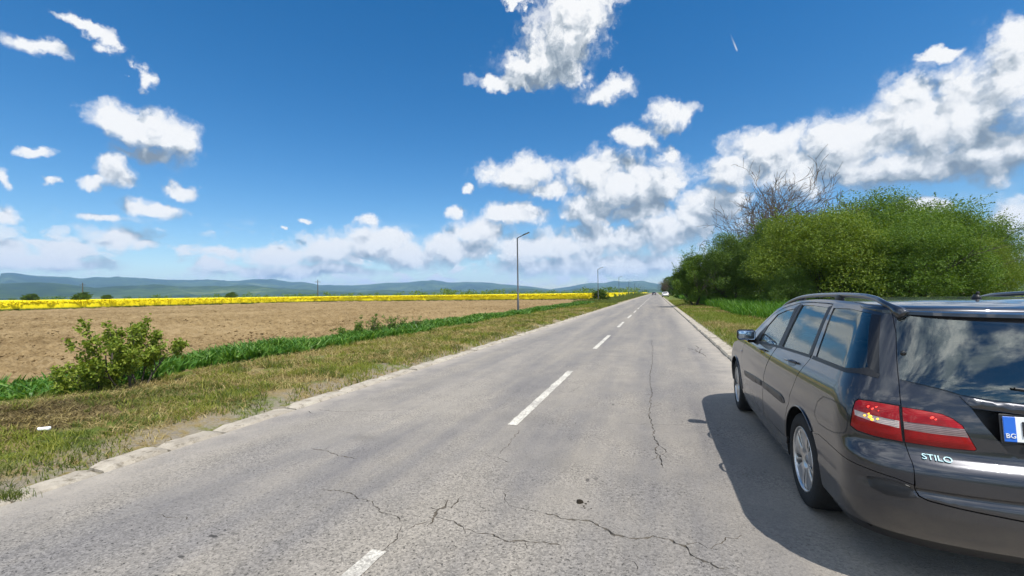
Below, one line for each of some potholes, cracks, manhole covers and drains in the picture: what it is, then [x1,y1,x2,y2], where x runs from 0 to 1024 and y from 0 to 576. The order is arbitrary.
crack [322,489,560,551]
crack [503,490,742,569]
crack [628,340,666,467]
